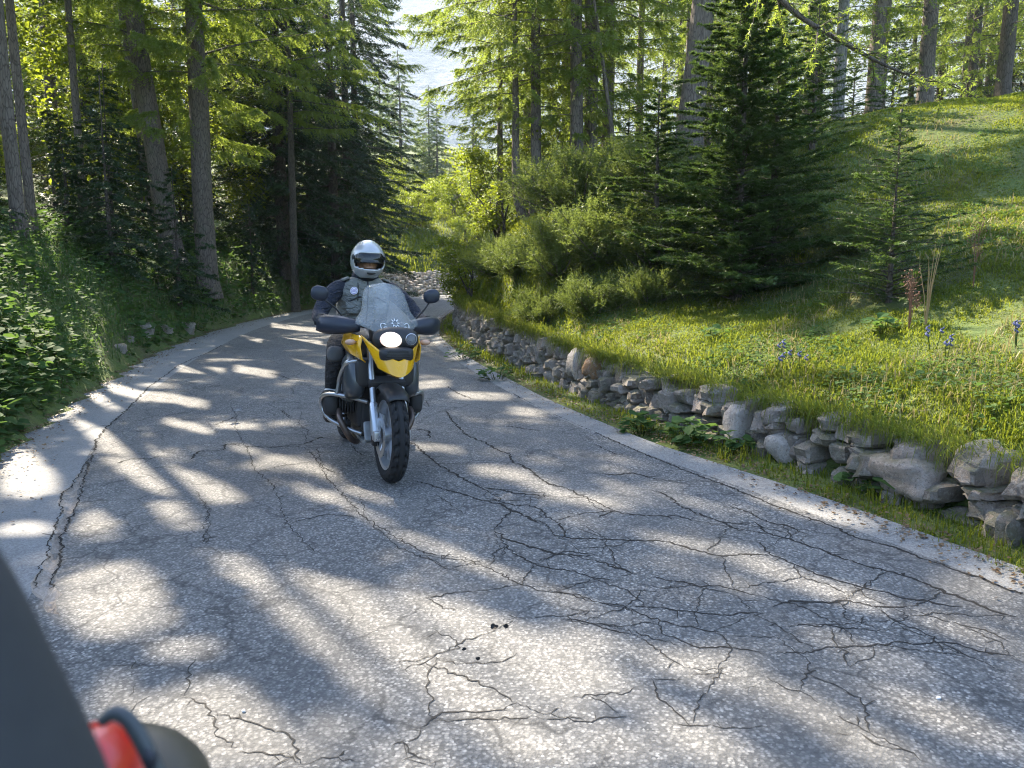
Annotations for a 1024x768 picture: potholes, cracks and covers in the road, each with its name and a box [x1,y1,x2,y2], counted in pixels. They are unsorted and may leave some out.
crack [191,386,1018,767]
